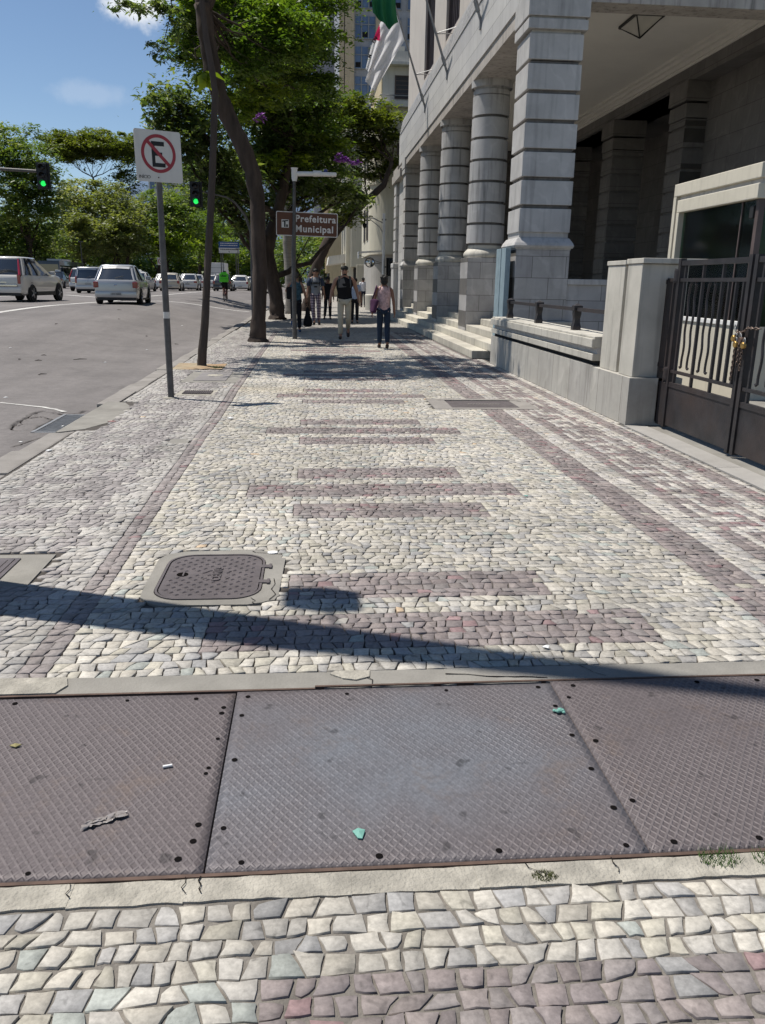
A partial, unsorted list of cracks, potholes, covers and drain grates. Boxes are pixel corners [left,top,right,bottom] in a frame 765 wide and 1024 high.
manhole cover [140,550,286,608]
manhole cover [0,554,56,587]
utility cover [426,399,540,410]
